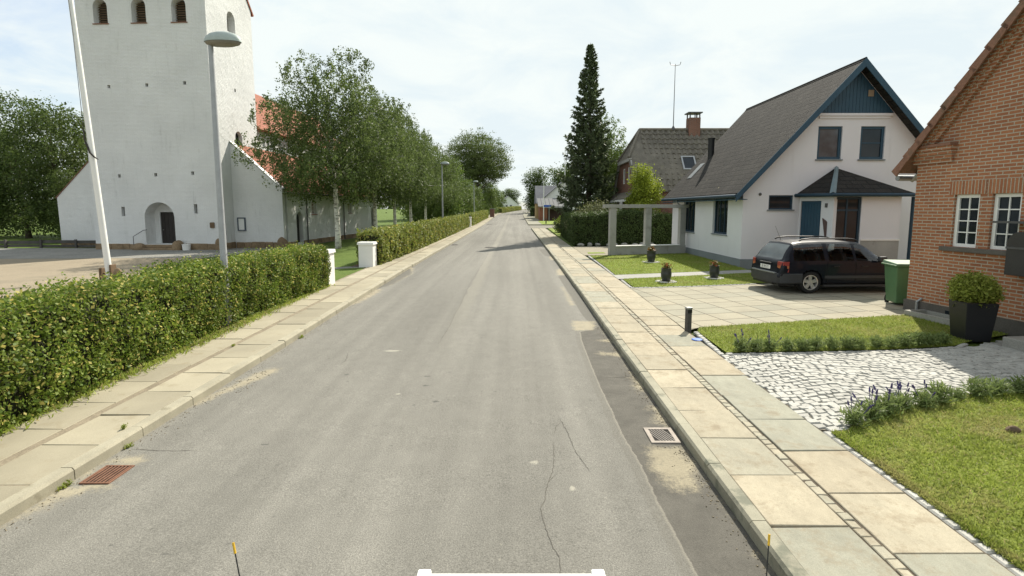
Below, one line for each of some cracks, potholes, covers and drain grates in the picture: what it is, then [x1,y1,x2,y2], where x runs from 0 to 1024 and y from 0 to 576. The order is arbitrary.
crack [540,421,589,574]
drain grate [643,427,681,444]
drain grate [79,465,135,485]
